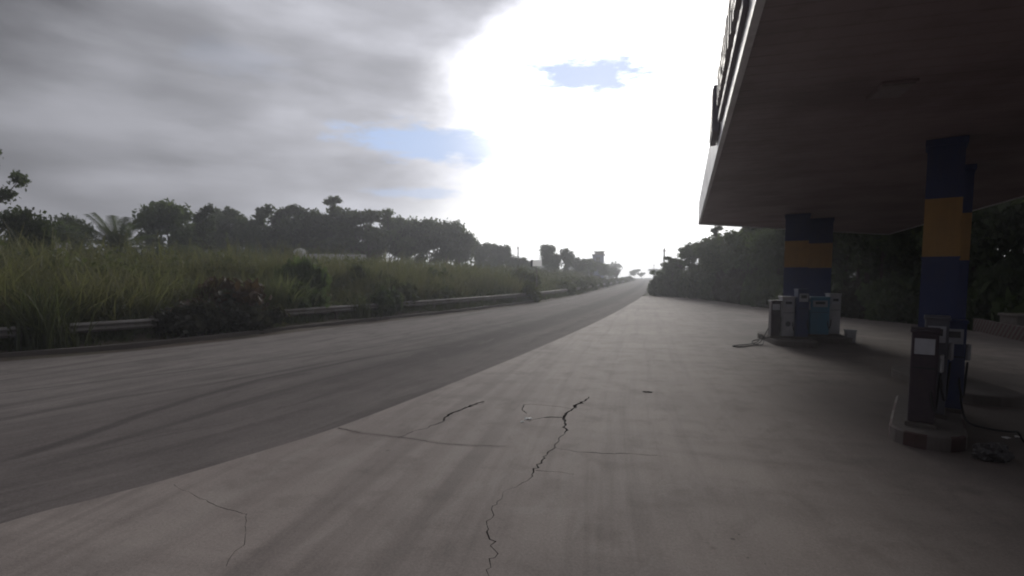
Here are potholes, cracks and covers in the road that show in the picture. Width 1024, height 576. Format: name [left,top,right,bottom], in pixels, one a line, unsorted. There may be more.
crack [177,487,247,566]
crack [339,401,487,446]
crack [486,399,642,575]
